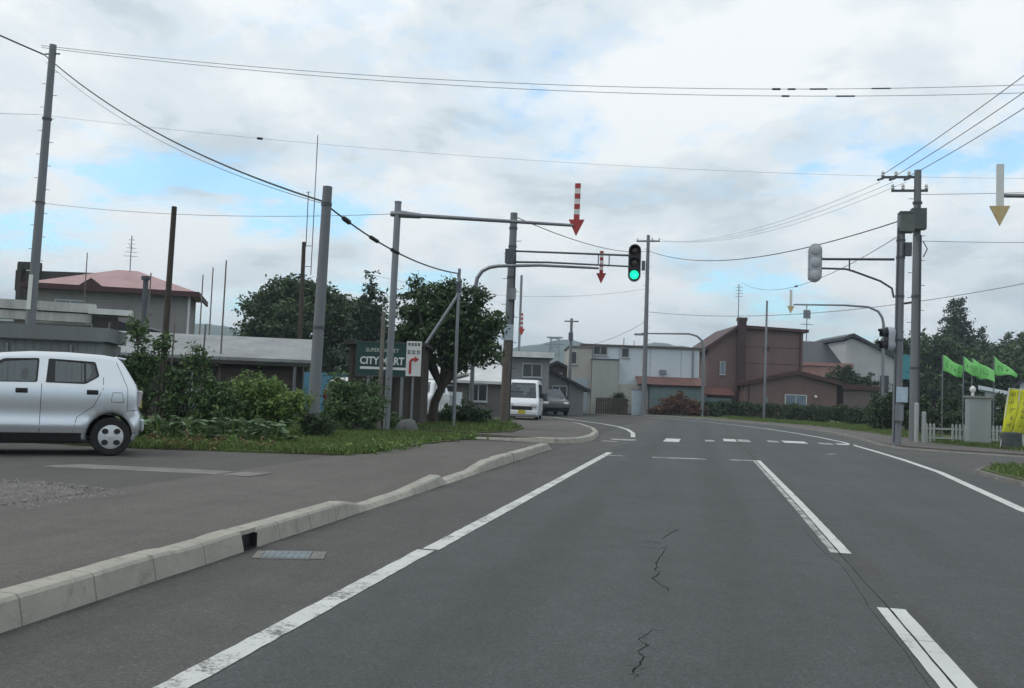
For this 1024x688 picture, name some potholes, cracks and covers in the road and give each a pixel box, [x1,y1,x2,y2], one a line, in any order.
crack [628,629,655,678]
crack [649,529,678,591]
